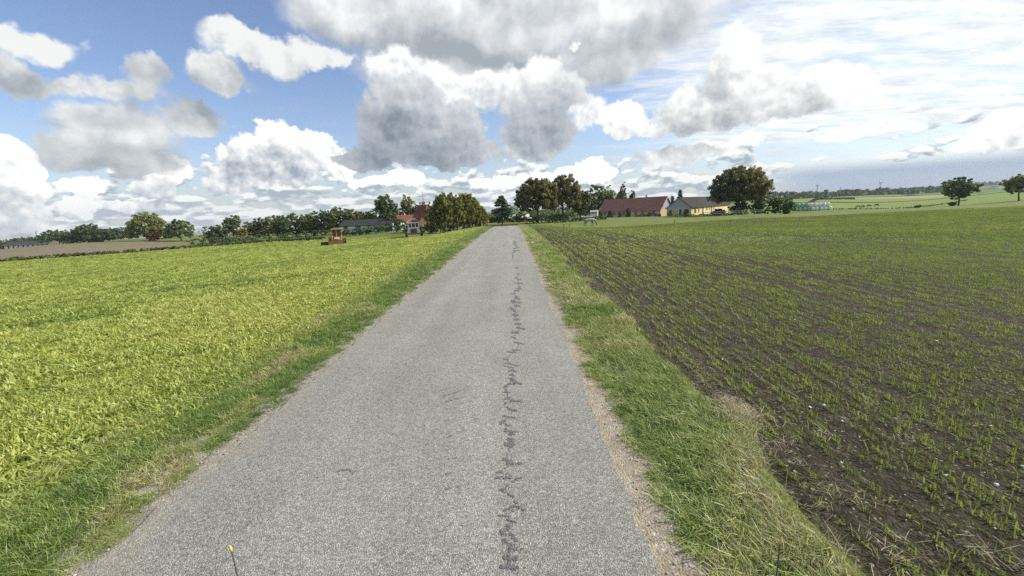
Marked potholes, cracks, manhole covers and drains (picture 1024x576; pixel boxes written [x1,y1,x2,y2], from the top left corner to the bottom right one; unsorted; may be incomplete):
crack [495,267,526,570]
